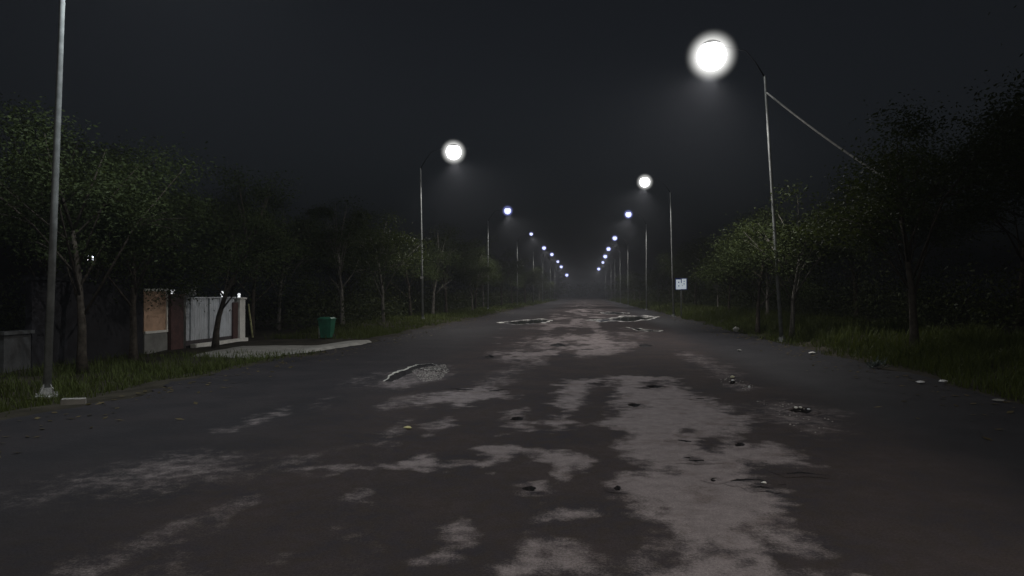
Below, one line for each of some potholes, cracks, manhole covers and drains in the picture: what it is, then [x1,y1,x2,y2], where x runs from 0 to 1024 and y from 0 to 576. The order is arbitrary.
pothole [781,407,821,416]
